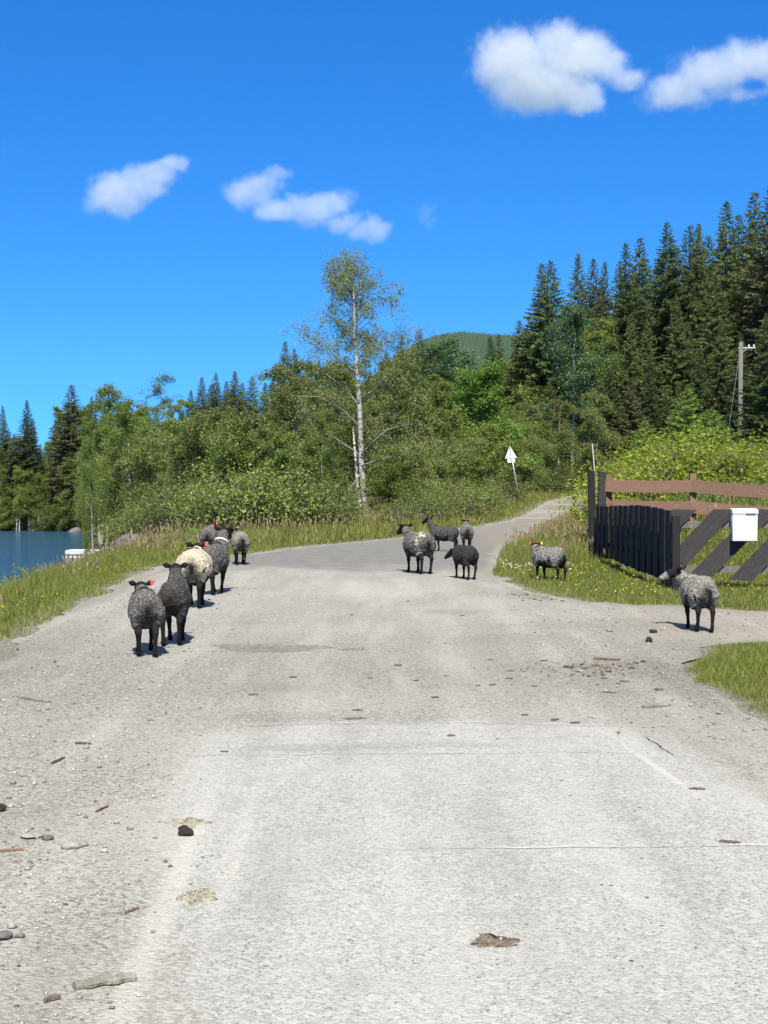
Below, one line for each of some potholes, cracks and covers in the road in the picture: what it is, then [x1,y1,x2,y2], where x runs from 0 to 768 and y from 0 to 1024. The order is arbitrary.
pothole [163,817,214,829]
pothole [176,888,218,905]
crack [201,721,675,756]
pothole [470,933,520,948]
